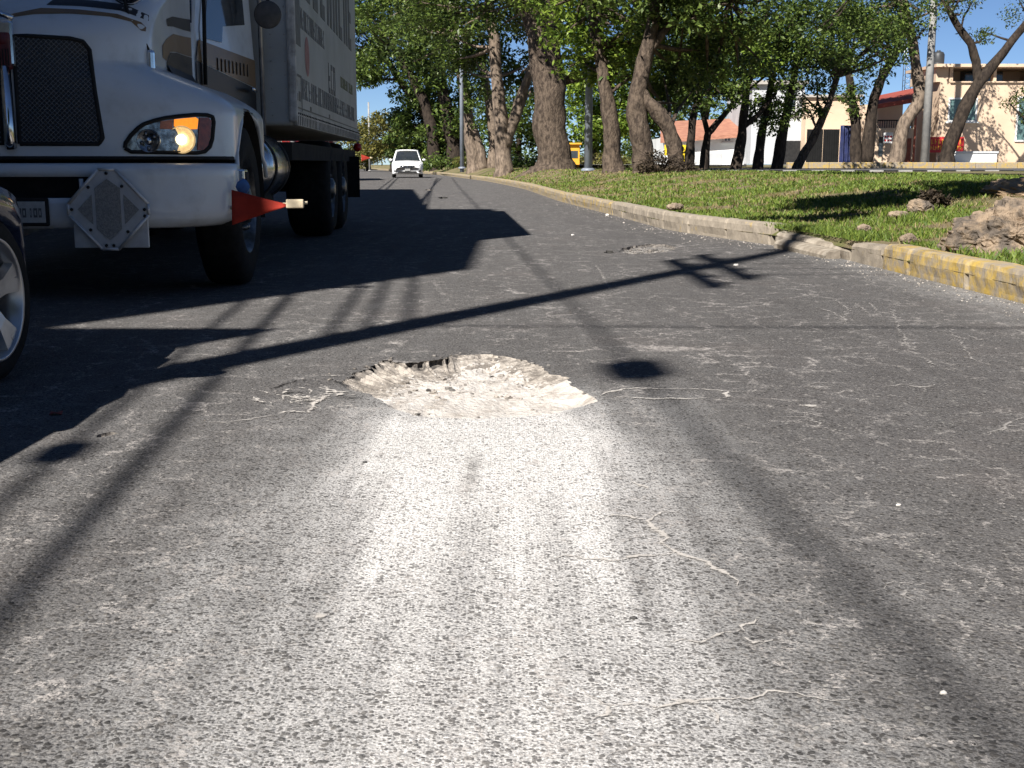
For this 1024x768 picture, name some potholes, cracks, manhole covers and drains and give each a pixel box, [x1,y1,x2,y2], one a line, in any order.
pothole [619,244,675,254]
pothole [341,354,597,419]
crack [820,300,933,364]
crack [595,387,731,399]
crack [580,688,847,722]
crack [542,512,739,584]
crack [667,619,773,643]
crack [187,373,359,423]
